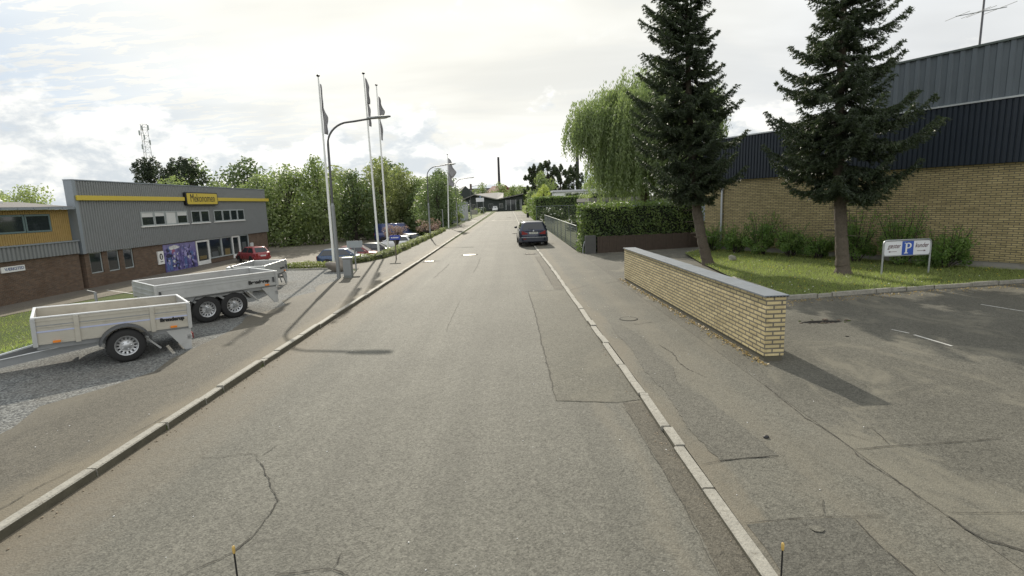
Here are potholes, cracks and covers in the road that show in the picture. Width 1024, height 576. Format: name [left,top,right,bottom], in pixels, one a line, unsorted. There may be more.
crack [946,512,1024,551]
crack [277,554,349,576]
crack [181,446,278,576]
crack [764,384,1002,509]
